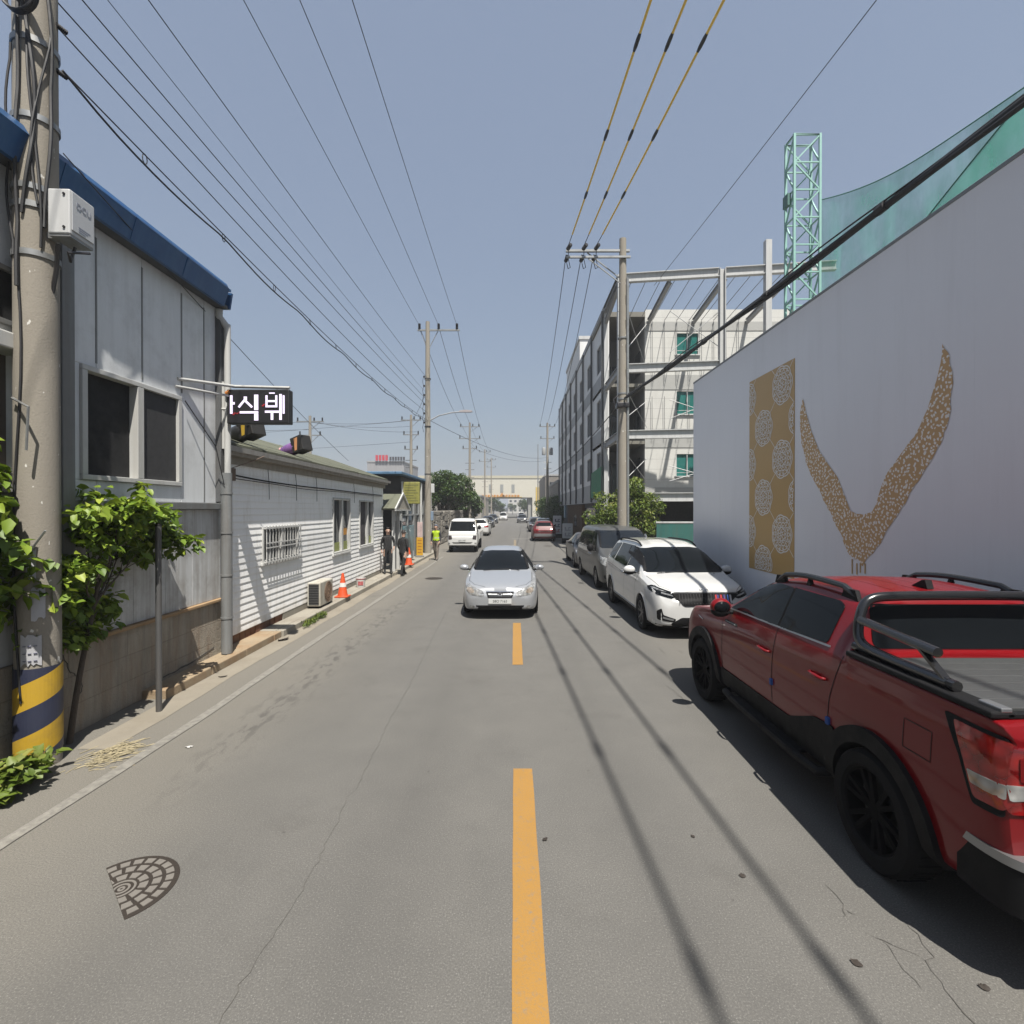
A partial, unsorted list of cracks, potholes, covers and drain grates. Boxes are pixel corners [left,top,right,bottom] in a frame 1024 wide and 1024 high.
crack [219,610,447,1024]
crack [865,921,976,1024]
manhole cover [106,856,180,920]
